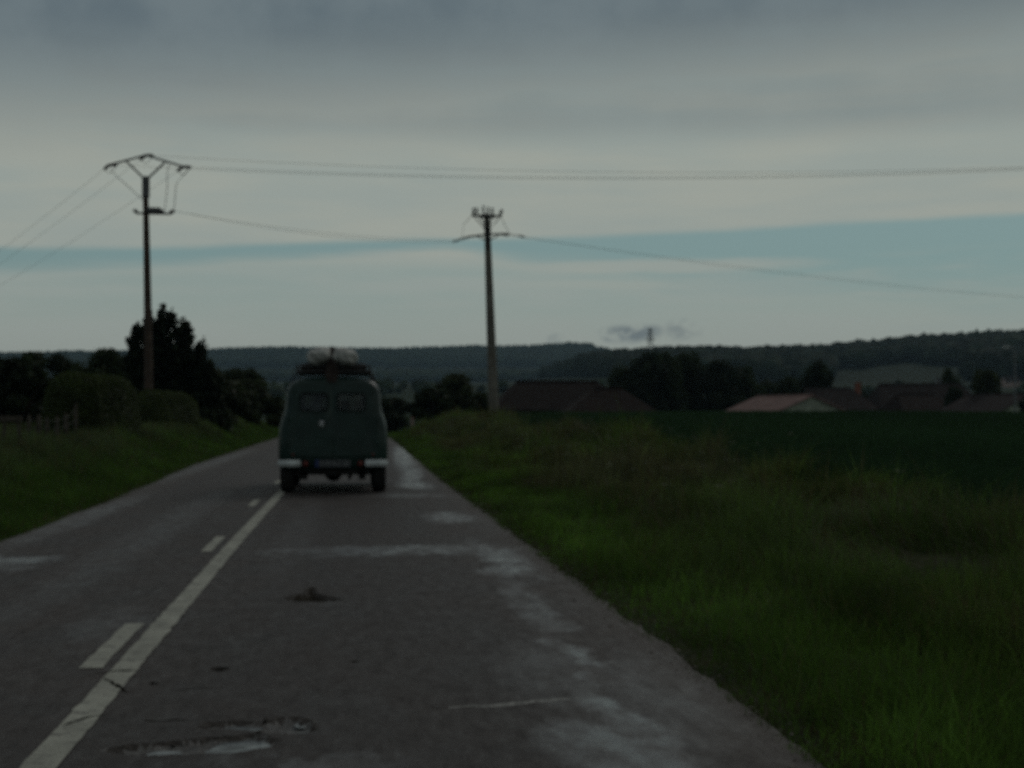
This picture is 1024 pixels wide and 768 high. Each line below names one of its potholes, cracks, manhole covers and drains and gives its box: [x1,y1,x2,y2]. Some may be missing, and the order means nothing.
crack [95,670,146,693]
pothole [196,716,322,734]
pothole [283,587,345,602]
crack [449,697,583,708]
pothole [92,730,281,756]
